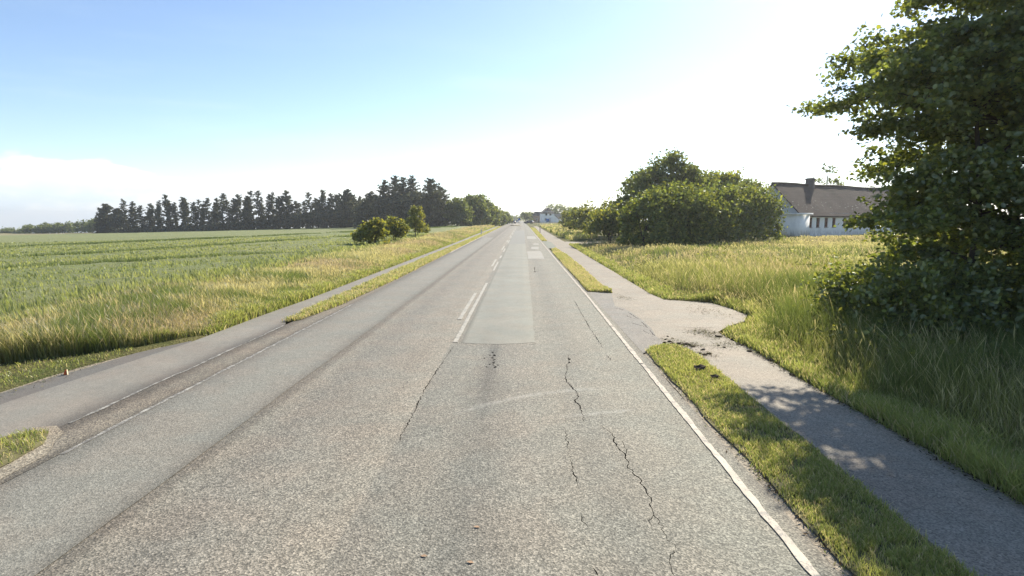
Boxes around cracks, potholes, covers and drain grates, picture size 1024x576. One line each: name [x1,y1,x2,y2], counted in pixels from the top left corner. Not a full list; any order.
crack [602,426,678,575]
crack [564,358,598,575]
